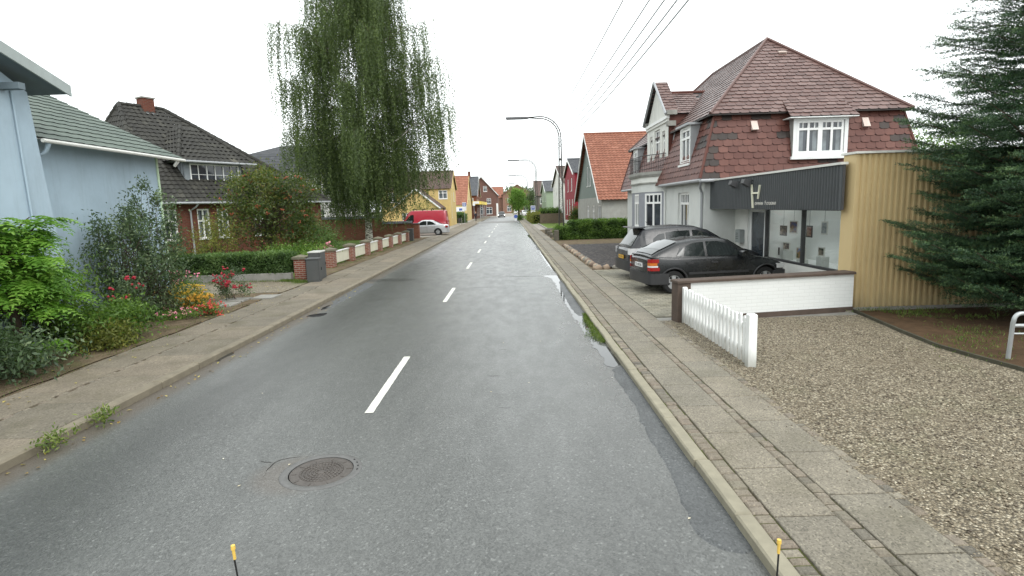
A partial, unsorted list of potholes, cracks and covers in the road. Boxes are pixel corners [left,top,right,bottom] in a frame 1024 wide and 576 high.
manhole cover [279,454,362,491]
